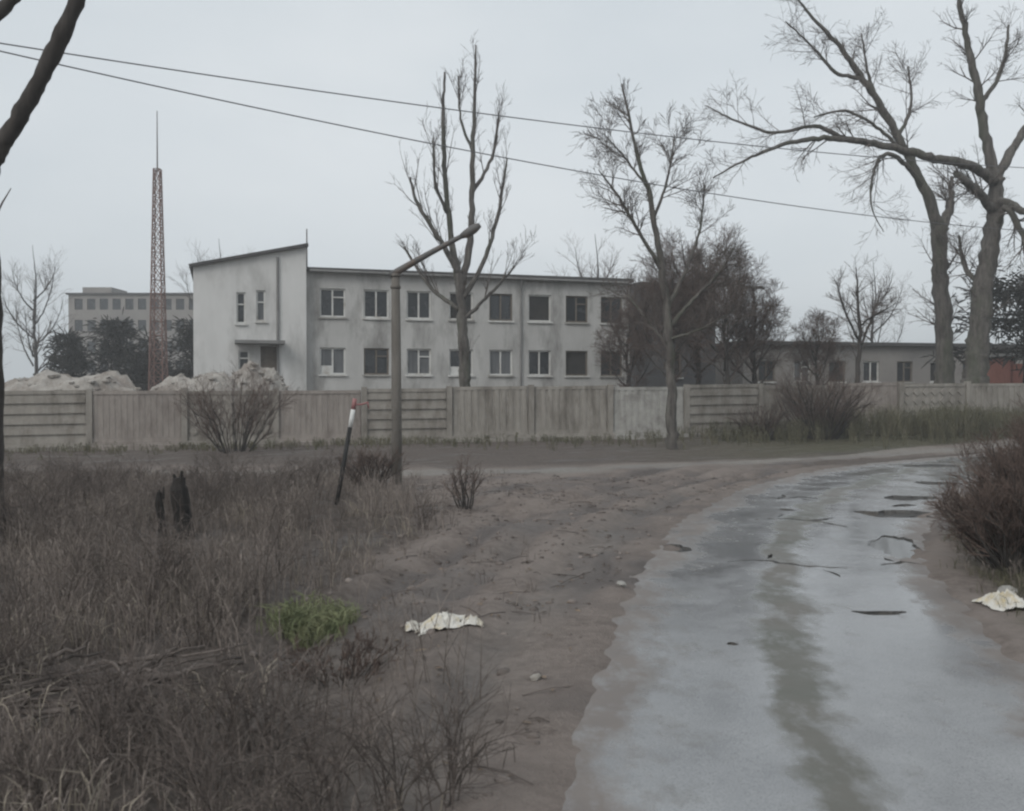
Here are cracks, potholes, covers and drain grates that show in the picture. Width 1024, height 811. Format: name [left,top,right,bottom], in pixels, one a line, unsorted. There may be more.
crack [728,554,848,577]
pothole [853,510,932,518]
crack [755,494,848,528]
pothole [867,535,923,559]
